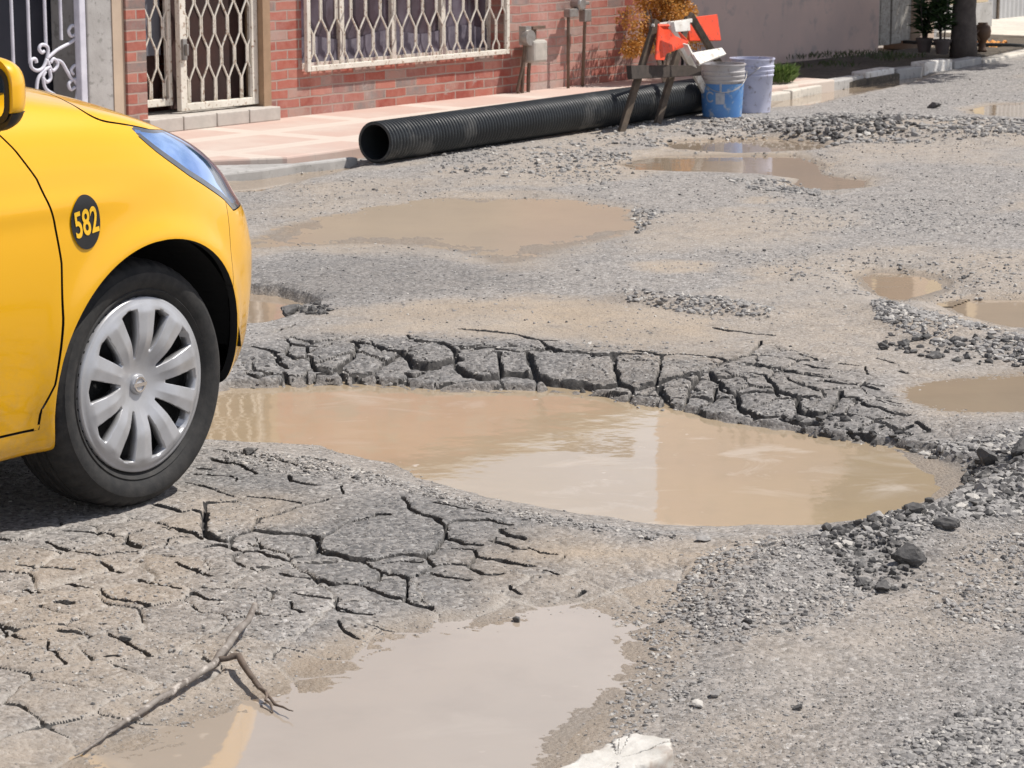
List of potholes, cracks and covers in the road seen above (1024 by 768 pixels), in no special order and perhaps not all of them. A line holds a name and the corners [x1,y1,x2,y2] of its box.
crack [240,324,941,455]
pothole [69,603,652,768]
pothole [247,282,323,323]
crack [0,449,654,738]
pothole [615,153,872,190]
pothole [250,198,643,262]
pothole [935,294,1024,328]
pothole [850,266,970,307]
pothole [206,375,982,526]
pothole [896,372,1024,413]
pothole [664,134,833,153]
